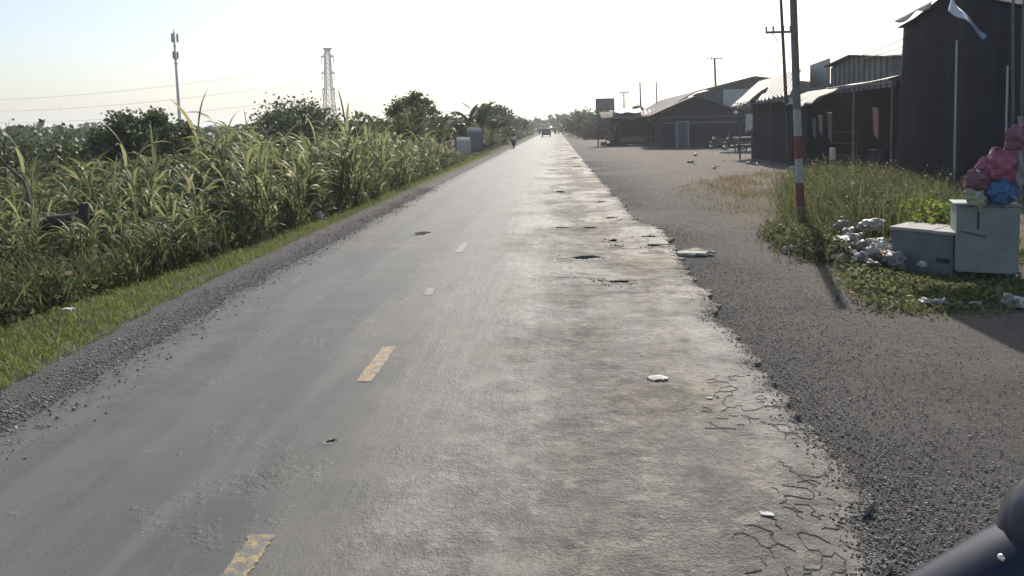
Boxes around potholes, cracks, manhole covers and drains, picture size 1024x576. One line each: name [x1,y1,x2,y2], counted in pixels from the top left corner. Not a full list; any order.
pothole [318,437,342,446]
crack [701,375,889,576]
